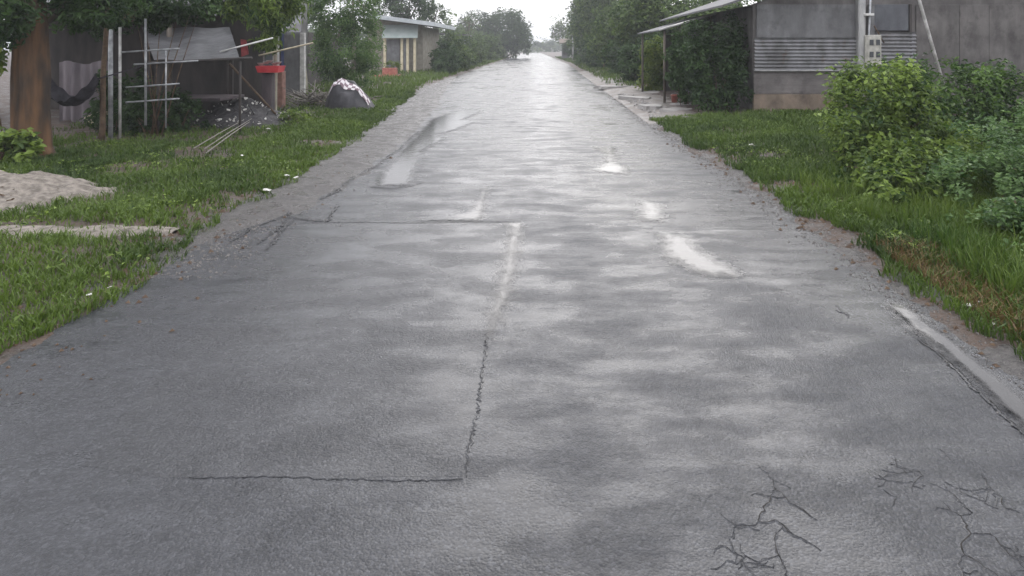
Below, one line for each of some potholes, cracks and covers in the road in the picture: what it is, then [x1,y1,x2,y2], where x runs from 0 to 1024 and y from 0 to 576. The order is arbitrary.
crack [710,467,821,576]
crack [874,338,1024,576]
crack [230,131,508,250]
